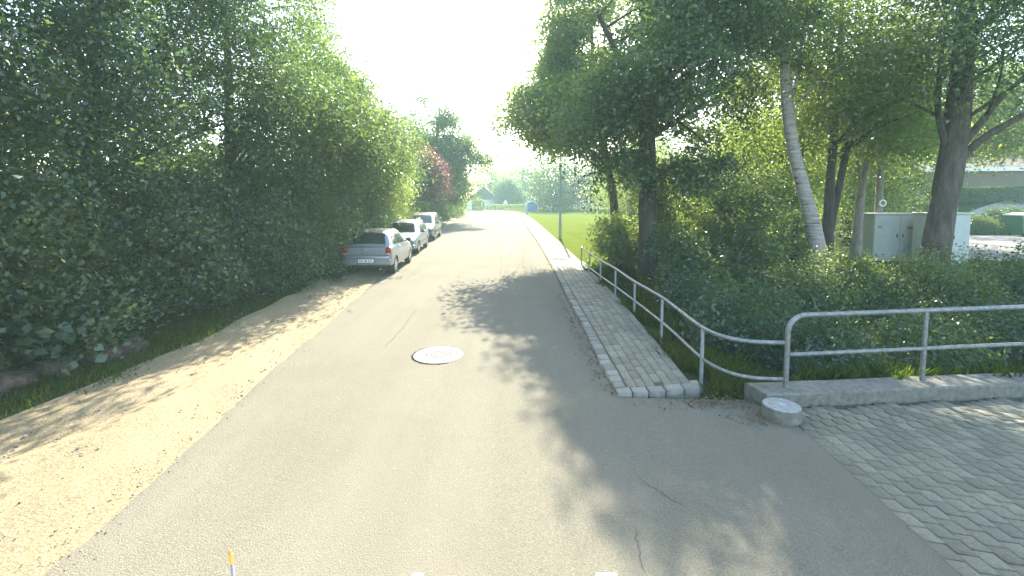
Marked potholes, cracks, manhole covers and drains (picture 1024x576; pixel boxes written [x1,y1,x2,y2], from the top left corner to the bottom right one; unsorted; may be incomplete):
manhole cover [411,346,463,365]
